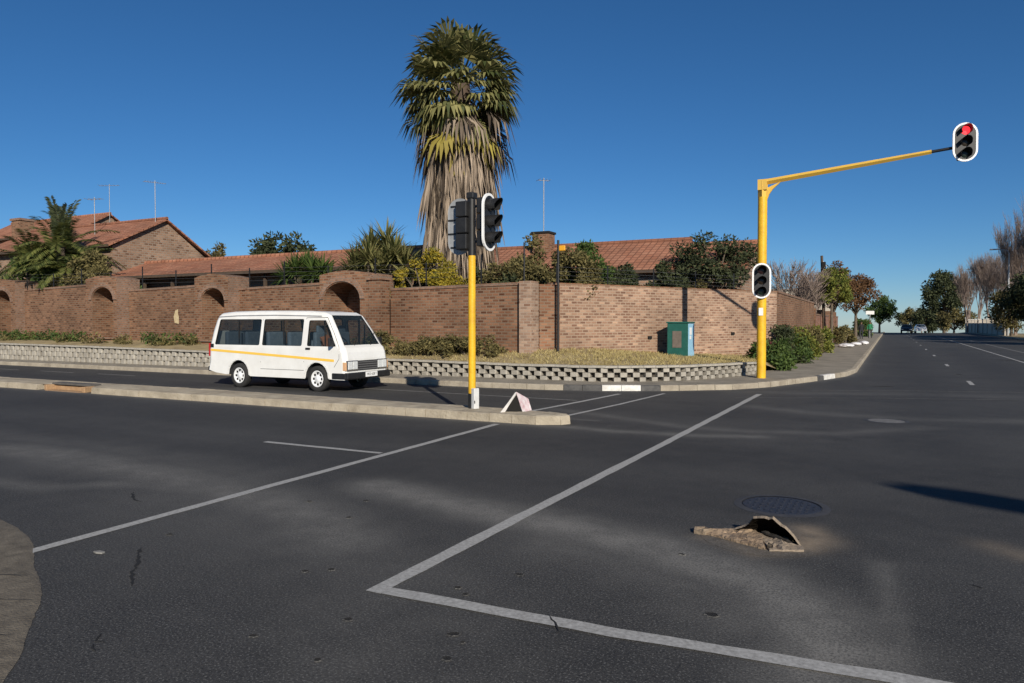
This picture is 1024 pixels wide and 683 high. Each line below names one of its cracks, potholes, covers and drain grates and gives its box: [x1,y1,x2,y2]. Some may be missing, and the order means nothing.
manhole cover [734,495,831,518]
drain grate [44,382,101,393]
crack [129,548,142,586]
pothole [701,516,830,557]
